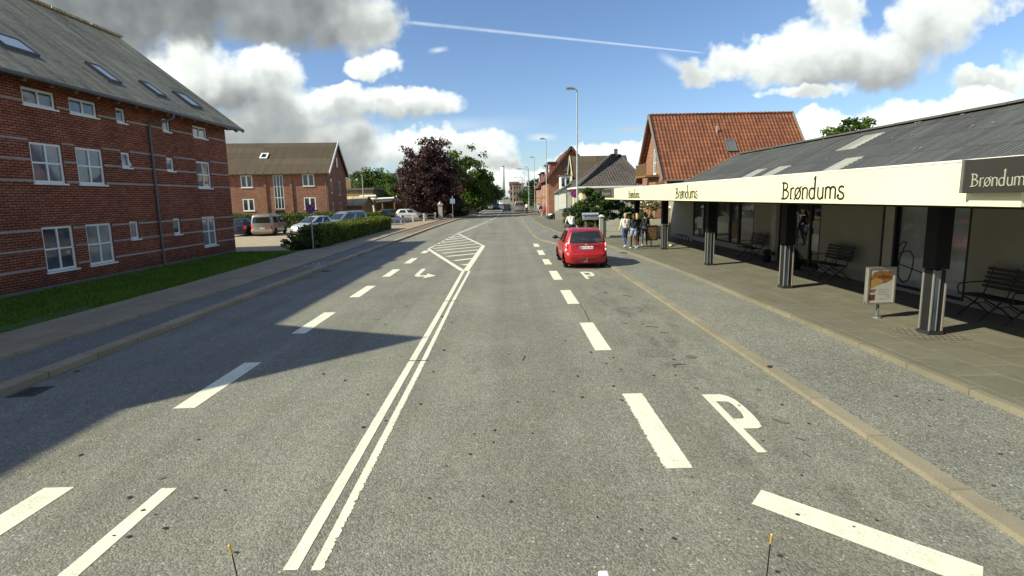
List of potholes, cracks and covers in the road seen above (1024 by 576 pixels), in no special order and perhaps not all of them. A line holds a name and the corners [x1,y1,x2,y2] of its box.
drain grate [6,386,55,398]
